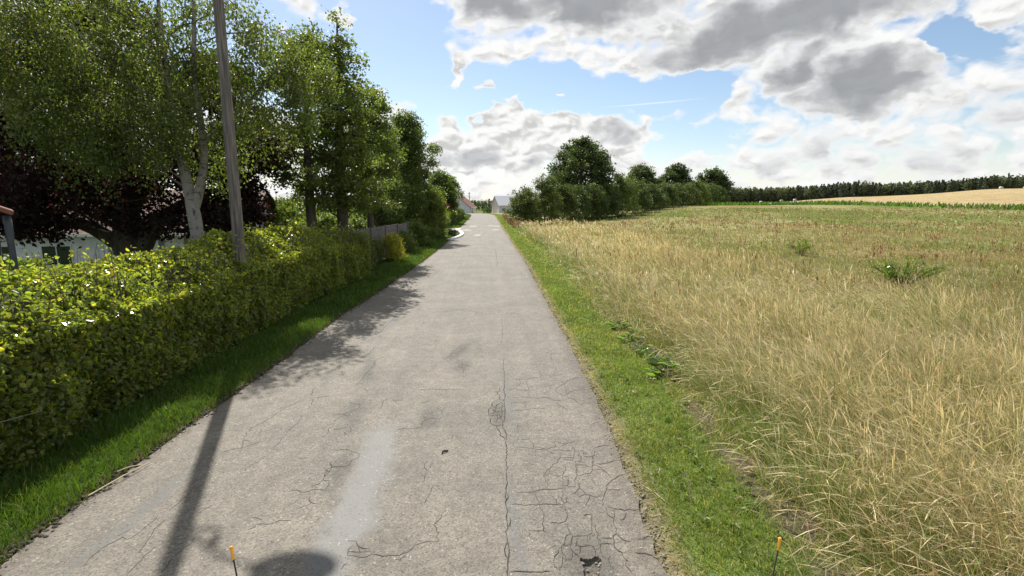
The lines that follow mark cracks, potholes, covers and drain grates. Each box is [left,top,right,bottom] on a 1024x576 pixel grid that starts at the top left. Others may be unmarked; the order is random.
crack [252,312,400,528]
pothole [579,556,602,576]
crack [220,387,326,464]
crack [83,494,205,573]
crack [488,359,665,576]
